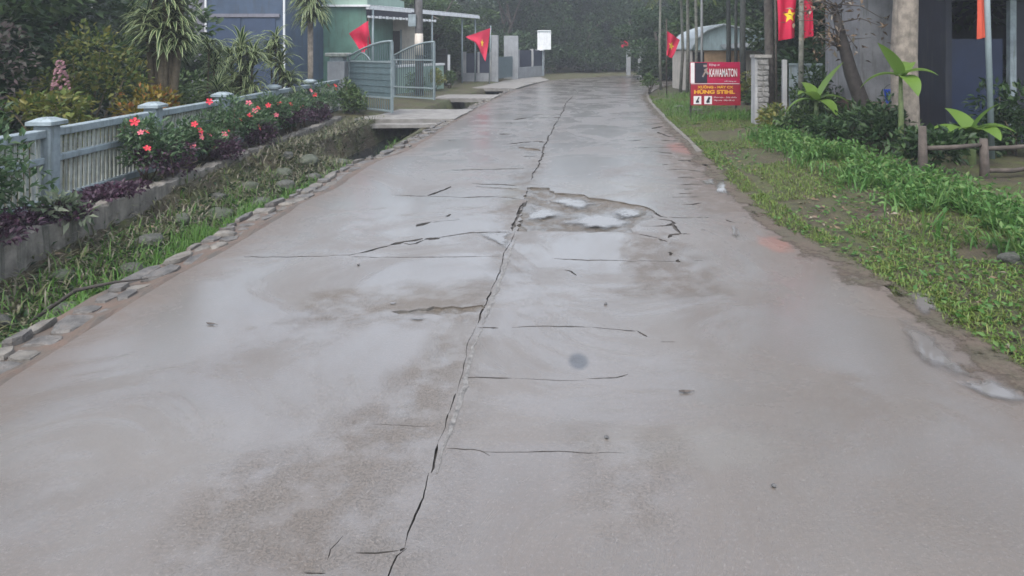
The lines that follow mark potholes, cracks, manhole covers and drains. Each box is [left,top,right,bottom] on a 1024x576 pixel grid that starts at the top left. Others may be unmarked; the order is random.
crack [448,448,616,456]
pothole [517,187,655,233]
crack [478,326,647,337]
crack [250,141,542,258]
